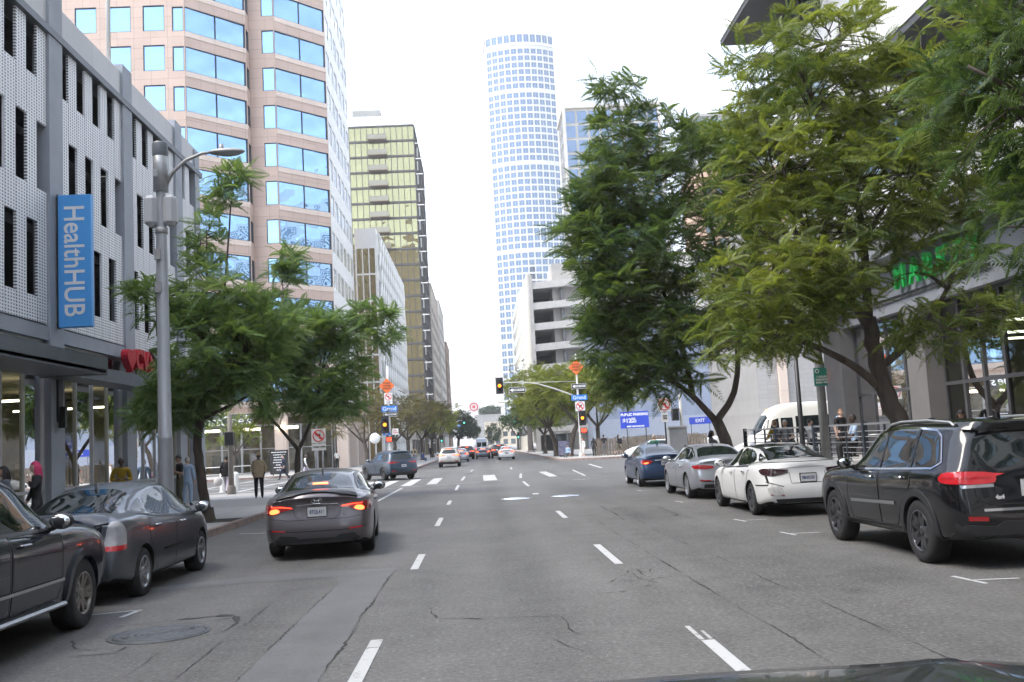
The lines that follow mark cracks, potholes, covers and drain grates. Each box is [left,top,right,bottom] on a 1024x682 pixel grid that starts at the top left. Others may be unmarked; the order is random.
manhole cover [106,624,211,644]
crack [318,573,393,682]
crack [430,608,595,656]
crack [589,514,829,661]
crack [68,581,341,682]
